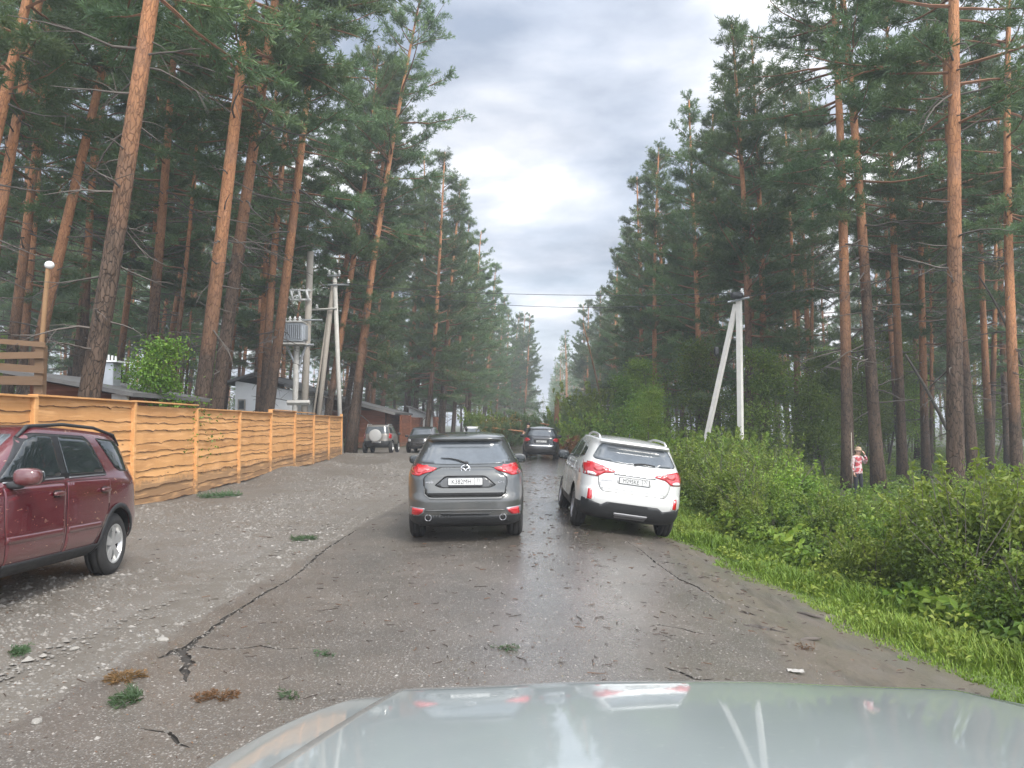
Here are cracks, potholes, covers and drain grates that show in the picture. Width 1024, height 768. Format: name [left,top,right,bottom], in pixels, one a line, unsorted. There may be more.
crack [141,728,190,748]
crack [633,545,721,603]
crack [159,530,357,682]
crack [667,668,711,680]
